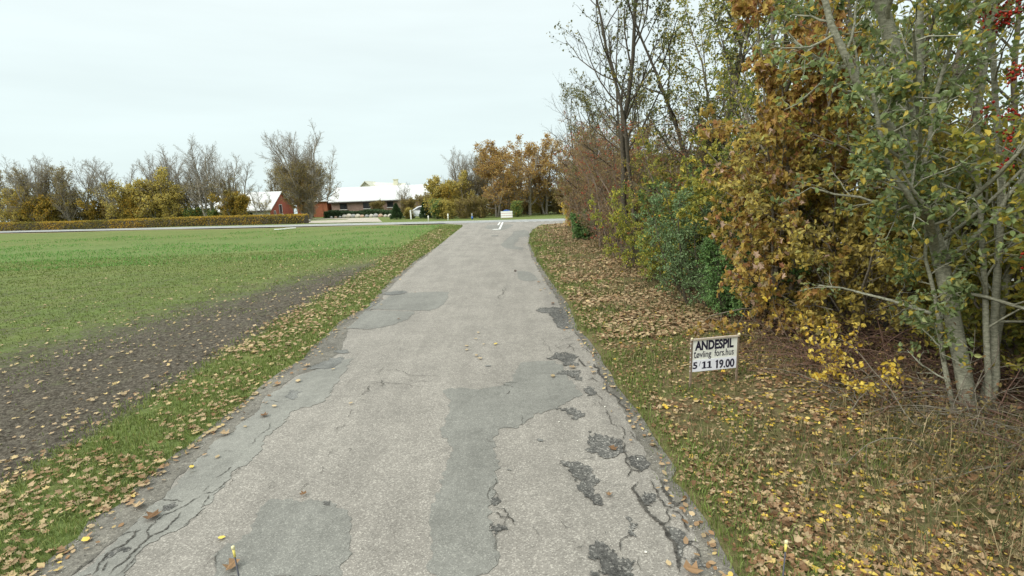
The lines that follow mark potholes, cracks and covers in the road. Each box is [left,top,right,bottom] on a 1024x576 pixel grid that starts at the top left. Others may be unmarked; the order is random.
crack [74,450,240,574]
pothole [585,431,626,458]
pothole [628,454,651,471]
crack [487,478,516,525]
pothole [537,306,574,329]
crack [547,332,701,574]
pothole [588,540,635,576]
pothole [560,460,603,505]
pothole [546,352,579,366]
